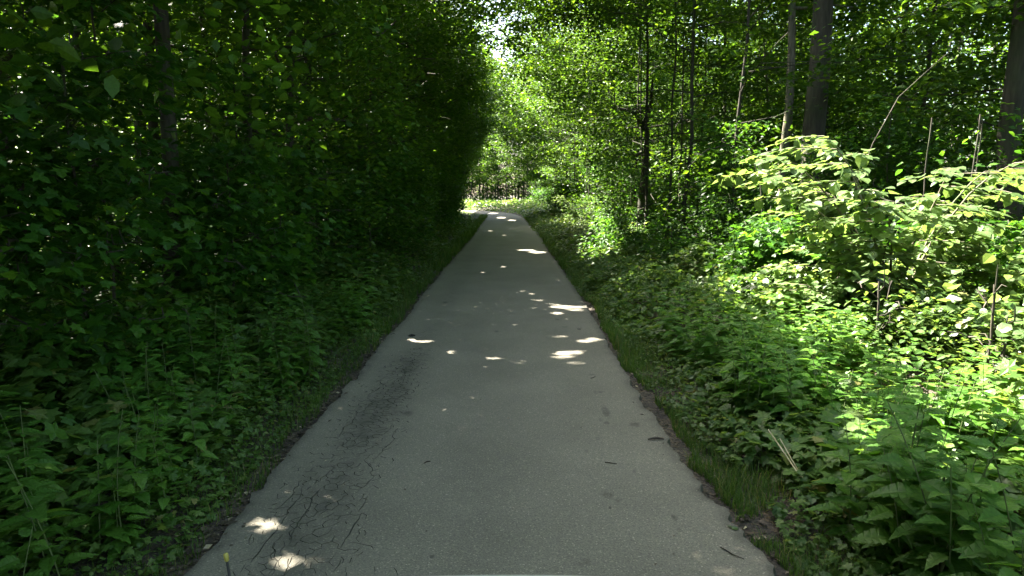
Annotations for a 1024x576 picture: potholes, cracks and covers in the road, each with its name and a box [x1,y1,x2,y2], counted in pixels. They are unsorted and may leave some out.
crack [226,330,430,576]
